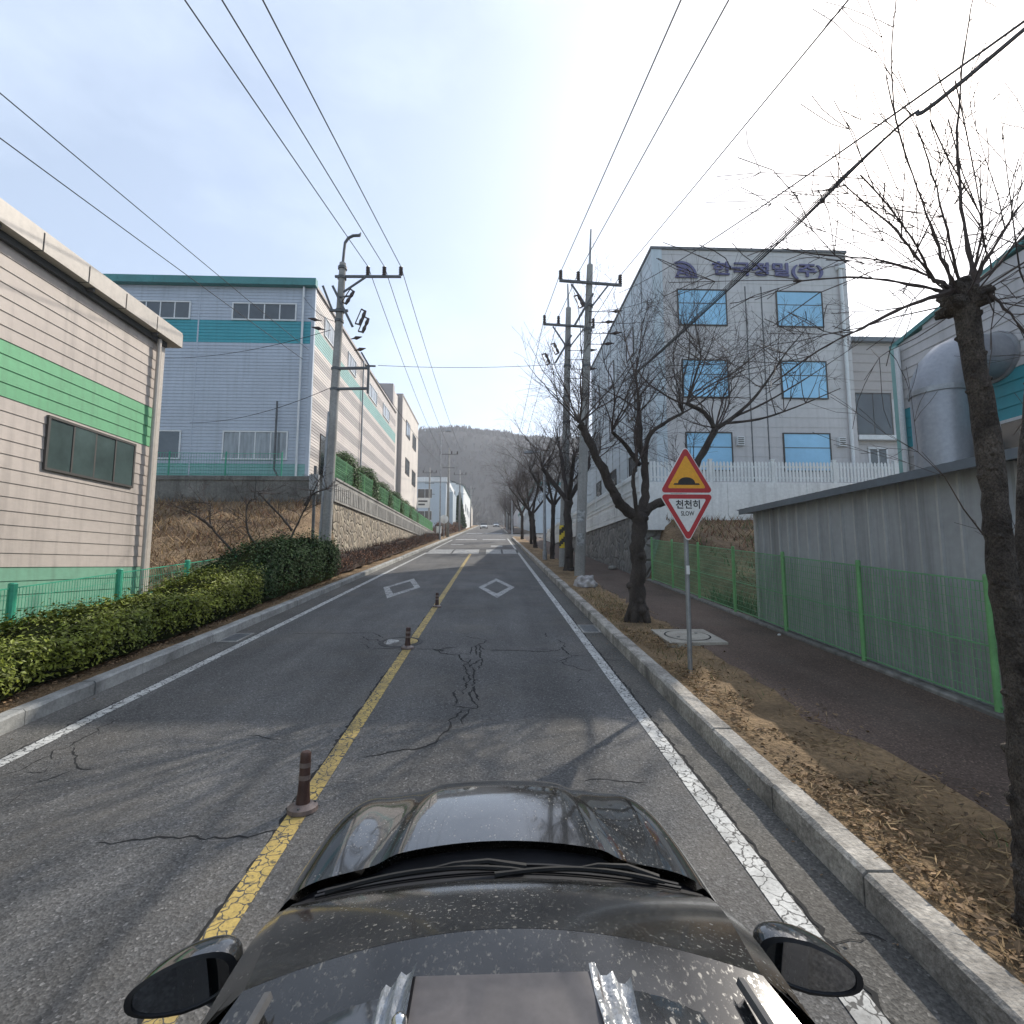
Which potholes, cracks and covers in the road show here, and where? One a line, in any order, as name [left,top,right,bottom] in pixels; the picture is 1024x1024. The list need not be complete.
drain grate [577,625,602,633]
crack [3,717,134,783]
crack [97,829,277,844]
crack [366,633,582,757]
manhole cover [378,637,423,648]
manhole cover [651,629,728,648]
drain grate [216,633,254,642]
